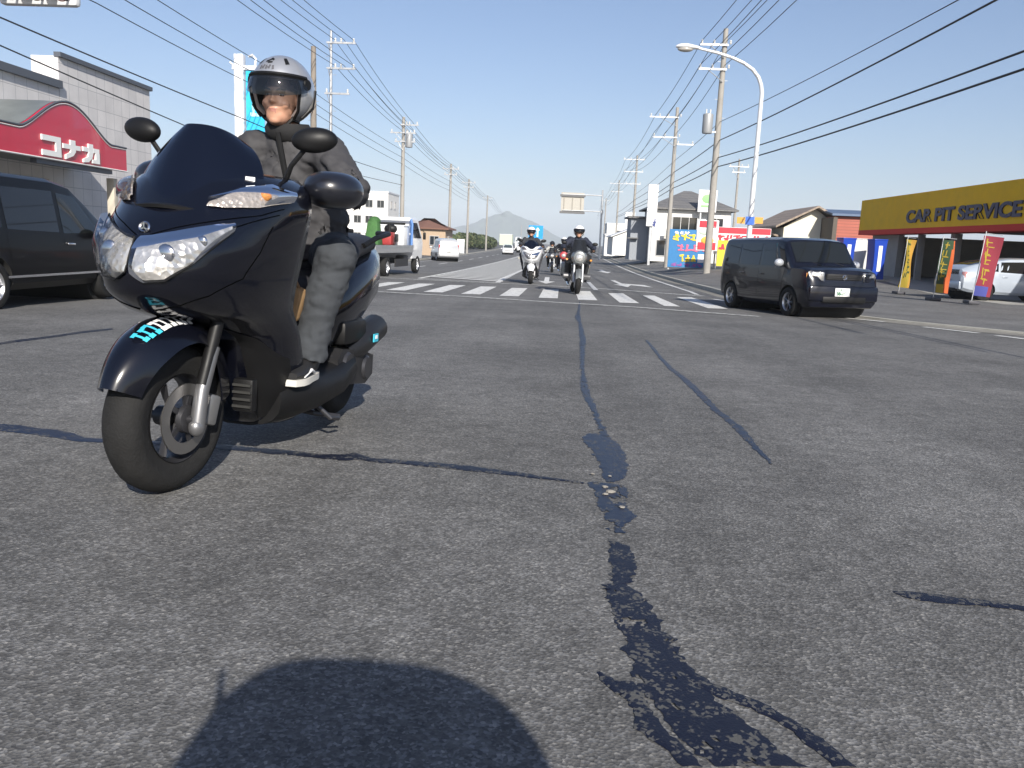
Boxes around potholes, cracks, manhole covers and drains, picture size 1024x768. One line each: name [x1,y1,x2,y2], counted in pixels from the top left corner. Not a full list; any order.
crack [645,340,772,464]
